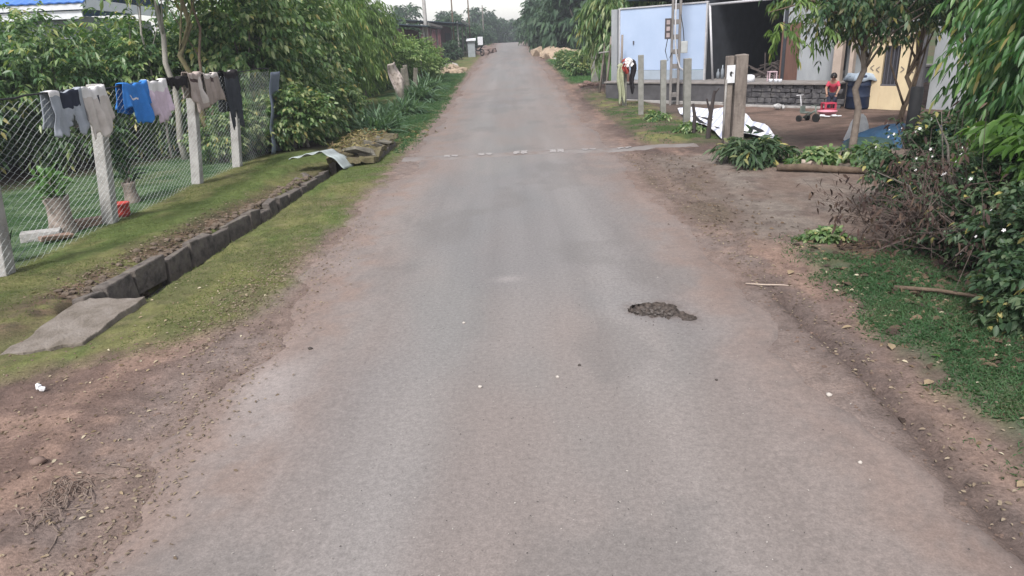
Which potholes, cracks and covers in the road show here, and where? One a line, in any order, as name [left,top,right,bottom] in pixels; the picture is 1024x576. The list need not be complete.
pothole [623,302,713,334]
